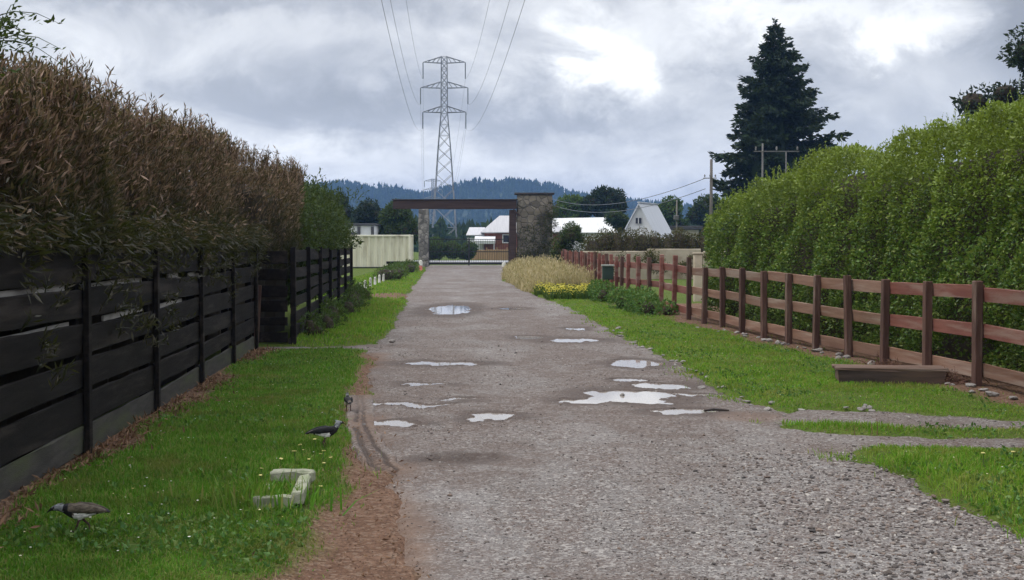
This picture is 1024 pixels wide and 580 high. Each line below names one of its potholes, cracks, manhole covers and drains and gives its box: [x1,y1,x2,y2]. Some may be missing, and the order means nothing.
pothole [418,453,500,463]
pothole [607,358,664,368]
pothole [555,382,733,405]
pothole [513,335,606,343]
pothole [645,407,719,415]
pothole [424,304,478,315]
pothole [464,411,524,422]
pothole [363,418,428,427]
pothole [373,396,475,409]
